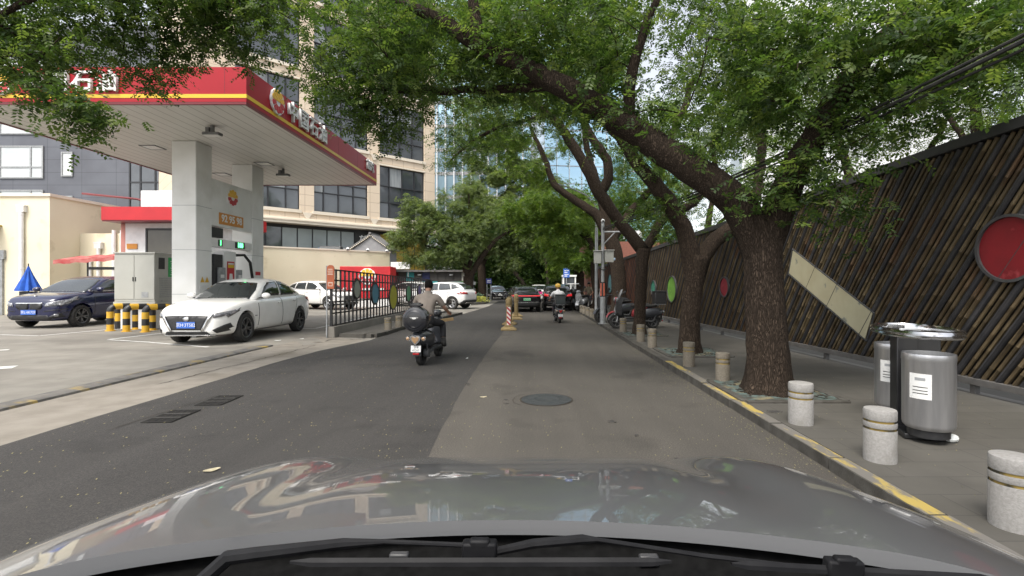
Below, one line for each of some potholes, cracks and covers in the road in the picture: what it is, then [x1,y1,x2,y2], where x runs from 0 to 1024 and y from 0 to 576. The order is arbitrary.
drain grate [194,395,244,406]
drain grate [140,409,201,423]
manhole cover [513,393,573,406]
